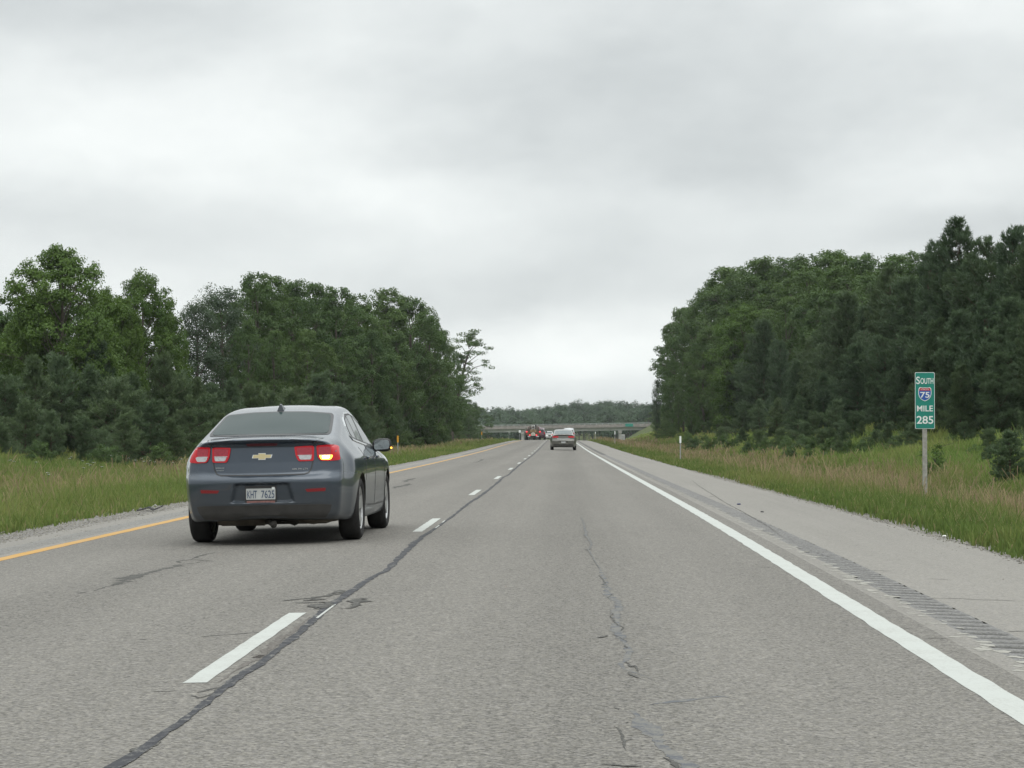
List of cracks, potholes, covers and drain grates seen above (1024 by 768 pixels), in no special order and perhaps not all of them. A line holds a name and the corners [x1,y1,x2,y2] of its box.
crack [581,516,648,678]
crack [80,552,215,593]
